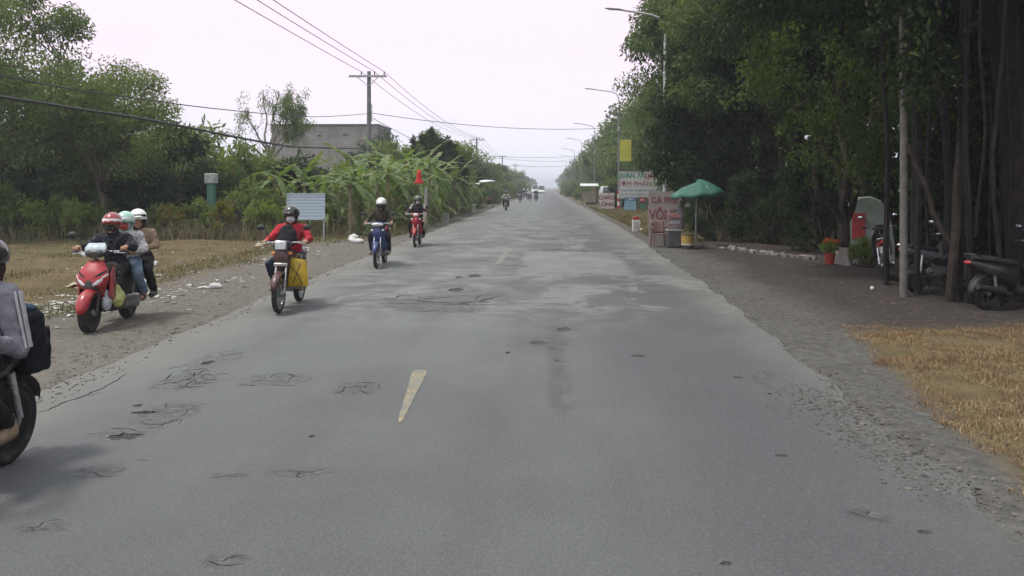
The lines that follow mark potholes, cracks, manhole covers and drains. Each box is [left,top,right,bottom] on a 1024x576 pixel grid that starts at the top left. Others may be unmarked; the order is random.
crack [337,382,380,394]
crack [240,373,307,386]
crack [112,365,227,432]
crack [37,373,127,413]
crack [379,295,500,311]
